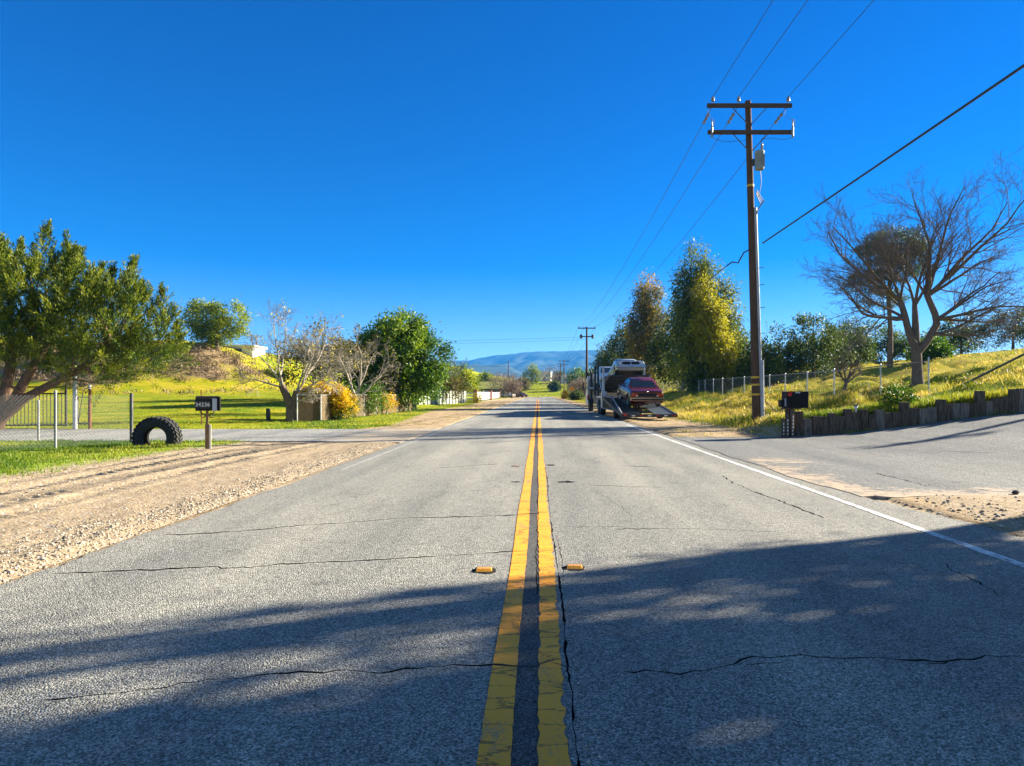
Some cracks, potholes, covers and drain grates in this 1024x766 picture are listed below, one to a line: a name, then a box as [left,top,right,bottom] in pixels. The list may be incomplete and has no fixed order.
crack [54,551,513,574]
crack [163,475,539,593]
crack [715,469,824,518]
crack [624,654,1024,675]
crack [47,664,572,700]
